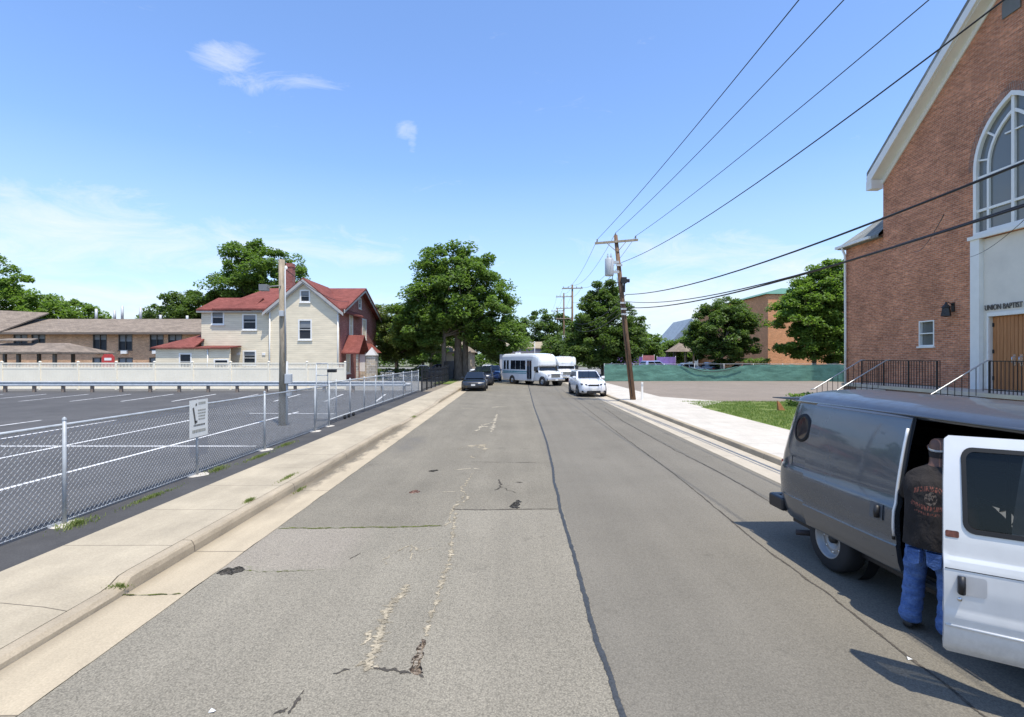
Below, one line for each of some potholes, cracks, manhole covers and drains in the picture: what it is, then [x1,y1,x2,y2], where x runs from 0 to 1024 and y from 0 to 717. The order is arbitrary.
crack [279,406,544,636]
pothole [409,639,426,675]
crack [335,584,424,677]
pothole [216,566,245,575]
crack [274,689,305,714]
